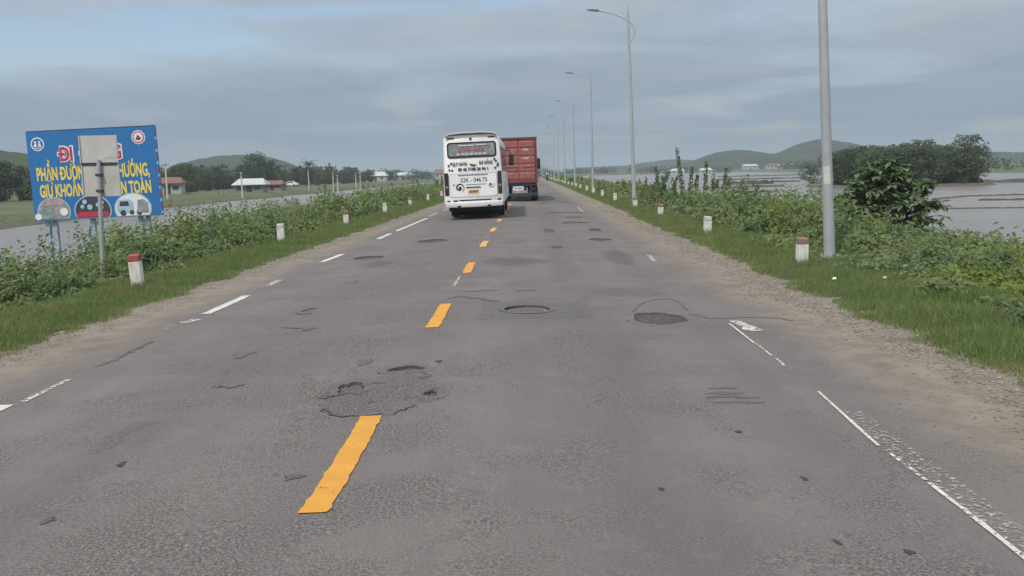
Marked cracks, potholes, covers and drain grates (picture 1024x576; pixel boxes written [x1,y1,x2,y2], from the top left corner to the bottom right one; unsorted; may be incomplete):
crack [447,290,532,301]
pothole [326,379,377,396]
pothole [626,311,696,326]
pothole [411,387,449,399]
crack [632,298,793,321]
manhole cover [498,304,556,314]
pothole [377,363,436,374]
